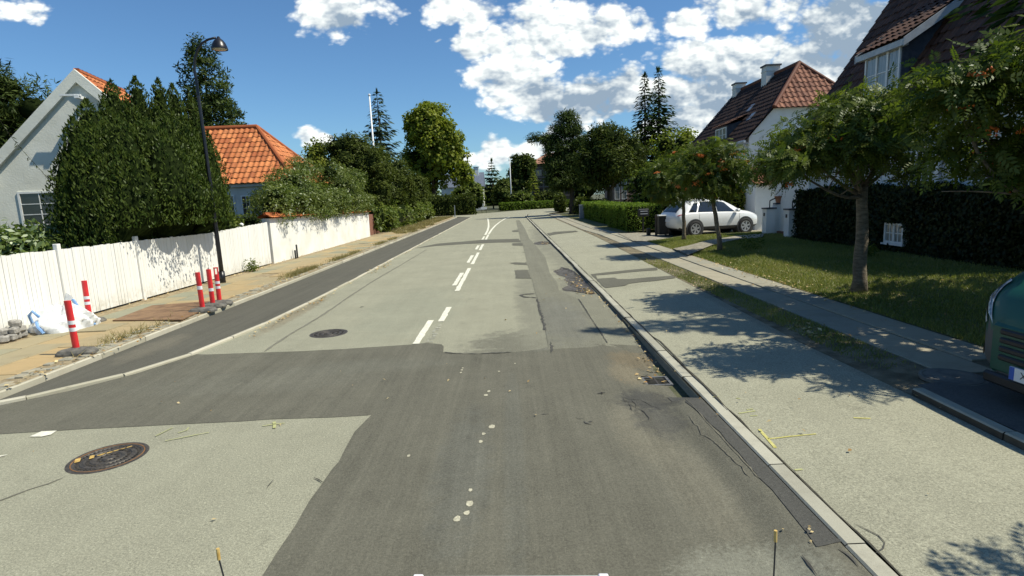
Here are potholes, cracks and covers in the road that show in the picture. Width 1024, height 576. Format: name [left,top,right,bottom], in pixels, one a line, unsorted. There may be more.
drain grate [642,376,674,386]
manhole cover [309,329,348,338]
crack [601,392,659,418]
manhole cover [64,442,150,474]
crack [686,399,760,478]
crack [520,293,554,352]
